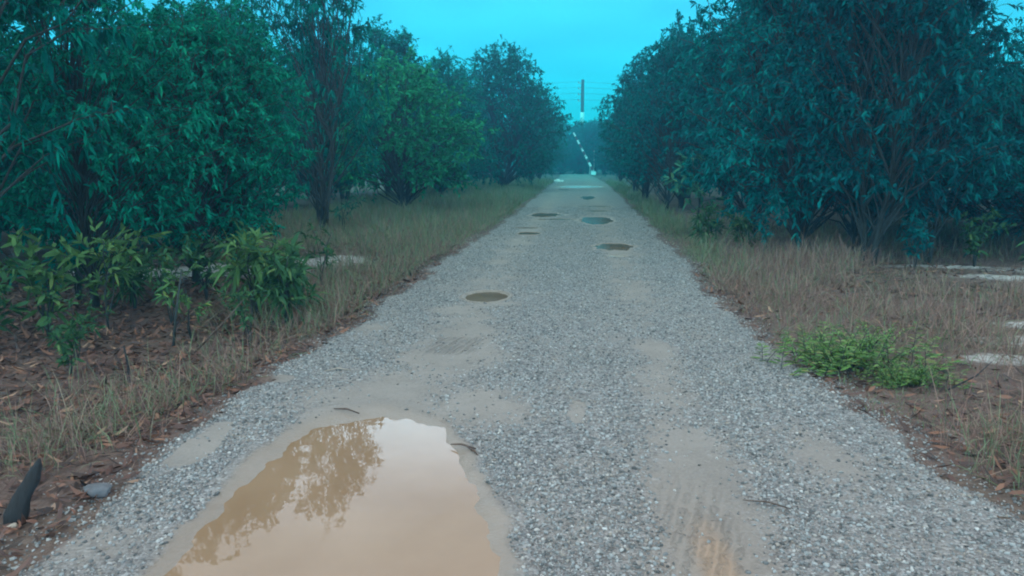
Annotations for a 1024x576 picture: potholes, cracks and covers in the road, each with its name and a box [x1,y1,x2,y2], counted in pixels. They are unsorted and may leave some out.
pothole [118,397,541,576]
pothole [577,216,616,225]
pothole [591,243,638,251]
pothole [461,290,512,303]
